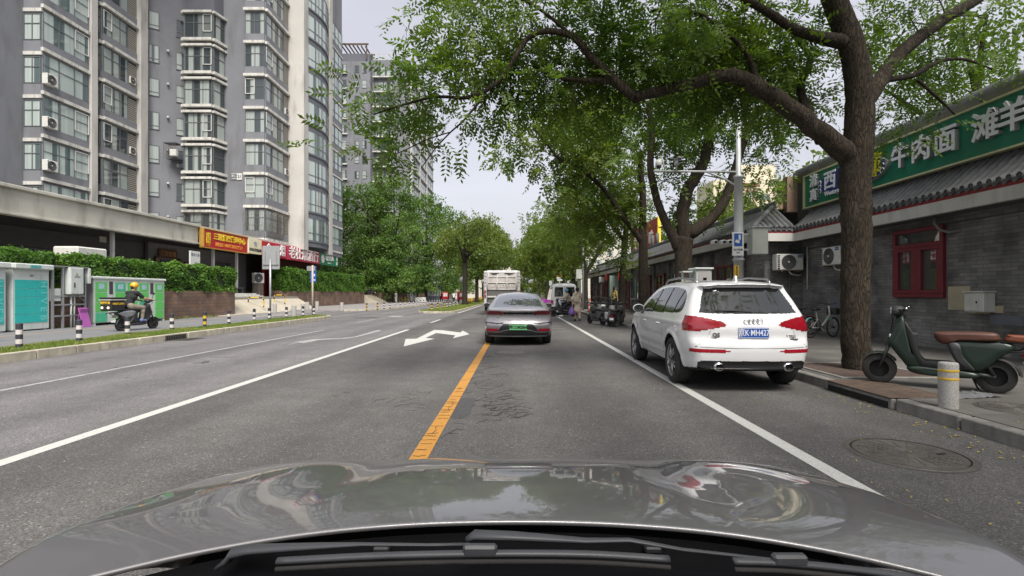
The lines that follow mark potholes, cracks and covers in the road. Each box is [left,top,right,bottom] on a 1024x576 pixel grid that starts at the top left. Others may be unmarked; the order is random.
drain grate [164,332,204,341]
crack [372,352,532,456]
manhole cover [842,437,983,473]
